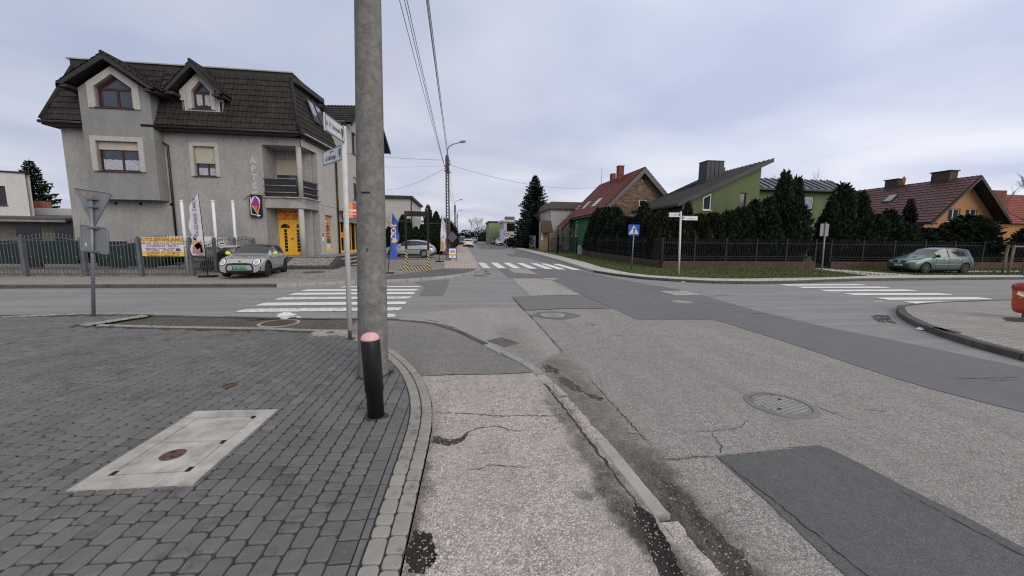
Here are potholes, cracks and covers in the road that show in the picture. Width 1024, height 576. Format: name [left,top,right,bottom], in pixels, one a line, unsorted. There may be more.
utility cover [66,409,278,493]
crack [662,420,810,460]
crack [439,376,650,501]
pothole [405,530,438,574]
manhole cover [257,319,300,328]
manhole cover [744,392,820,419]
drain grate [488,337,519,347]
